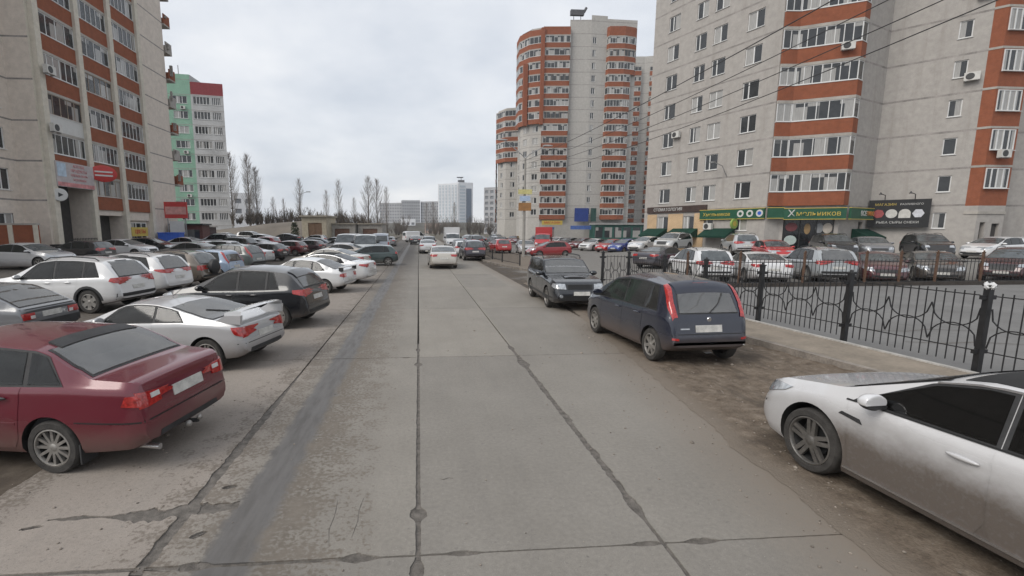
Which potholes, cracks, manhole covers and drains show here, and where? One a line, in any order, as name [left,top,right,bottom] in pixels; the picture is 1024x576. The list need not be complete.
crack [3,342,809,576]
